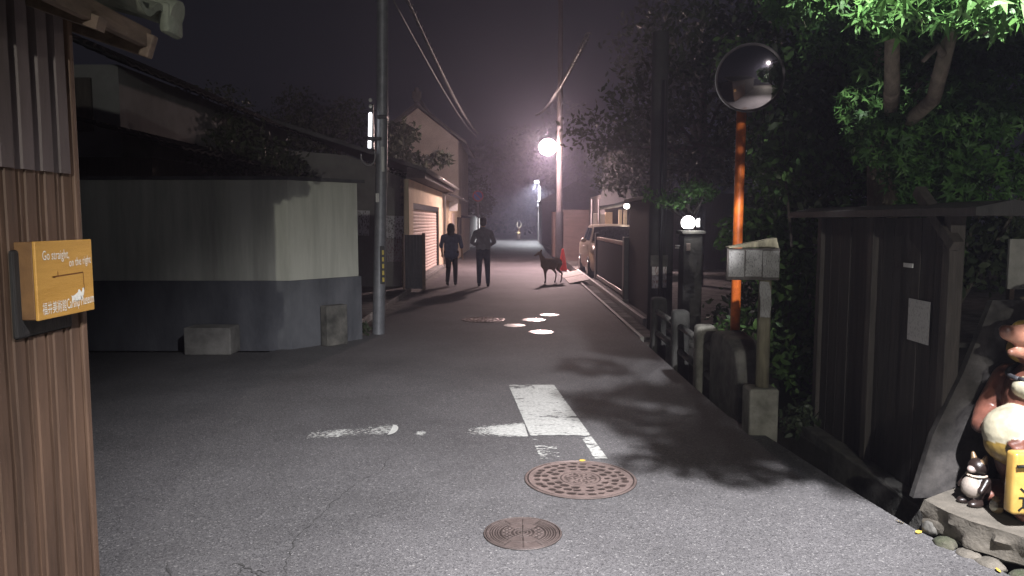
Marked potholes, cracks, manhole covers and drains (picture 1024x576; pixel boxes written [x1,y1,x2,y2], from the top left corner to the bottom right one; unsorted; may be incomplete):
manhole cover [524,460,637,499]
manhole cover [483,517,562,550]
crack [234,460,387,576]
